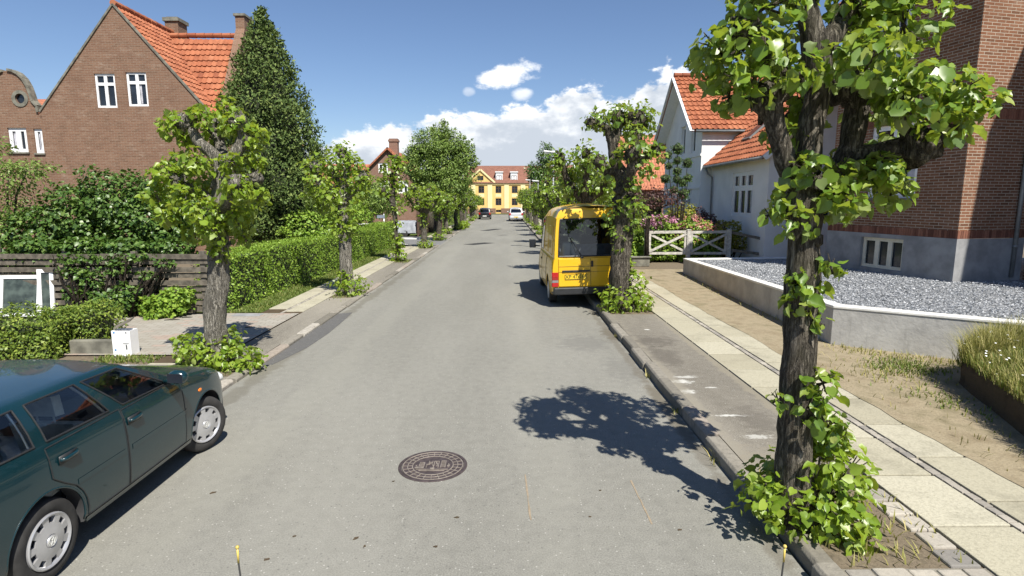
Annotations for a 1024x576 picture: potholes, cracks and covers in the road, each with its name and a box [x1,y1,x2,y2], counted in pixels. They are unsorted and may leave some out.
manhole cover [398,451,467,482]
